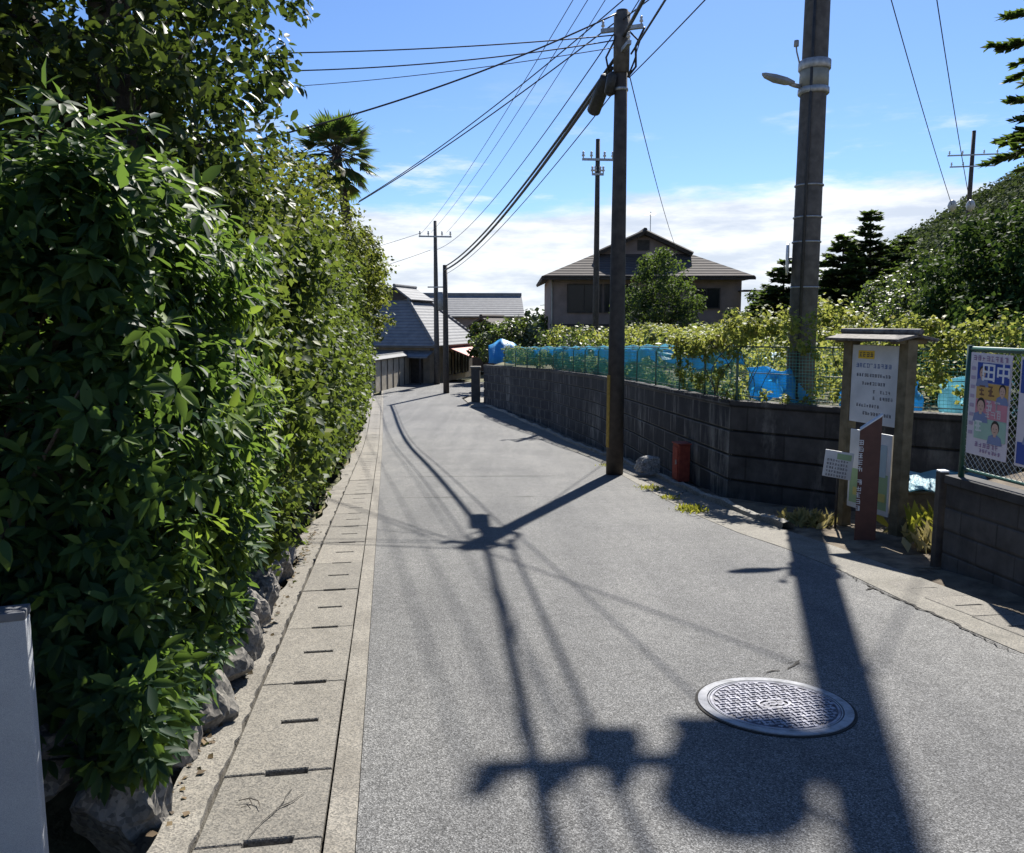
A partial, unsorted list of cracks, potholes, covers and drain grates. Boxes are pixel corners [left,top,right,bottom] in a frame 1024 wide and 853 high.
crack [842,571,1017,653]
manhole cover [695,677,858,738]
